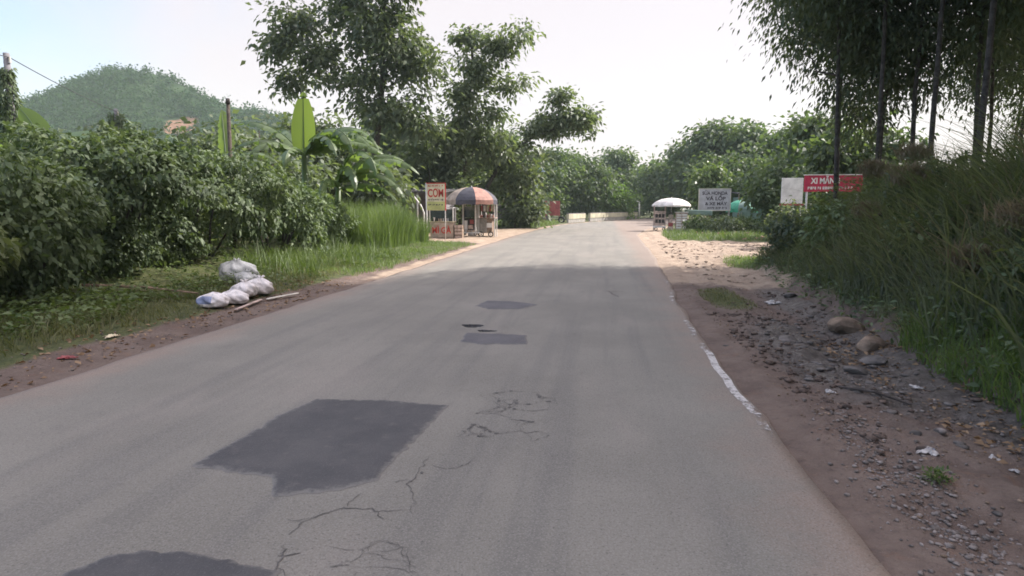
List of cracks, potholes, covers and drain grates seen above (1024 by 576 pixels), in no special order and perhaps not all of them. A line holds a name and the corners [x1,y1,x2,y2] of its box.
crack [274,458,474,576]
crack [458,390,556,442]
